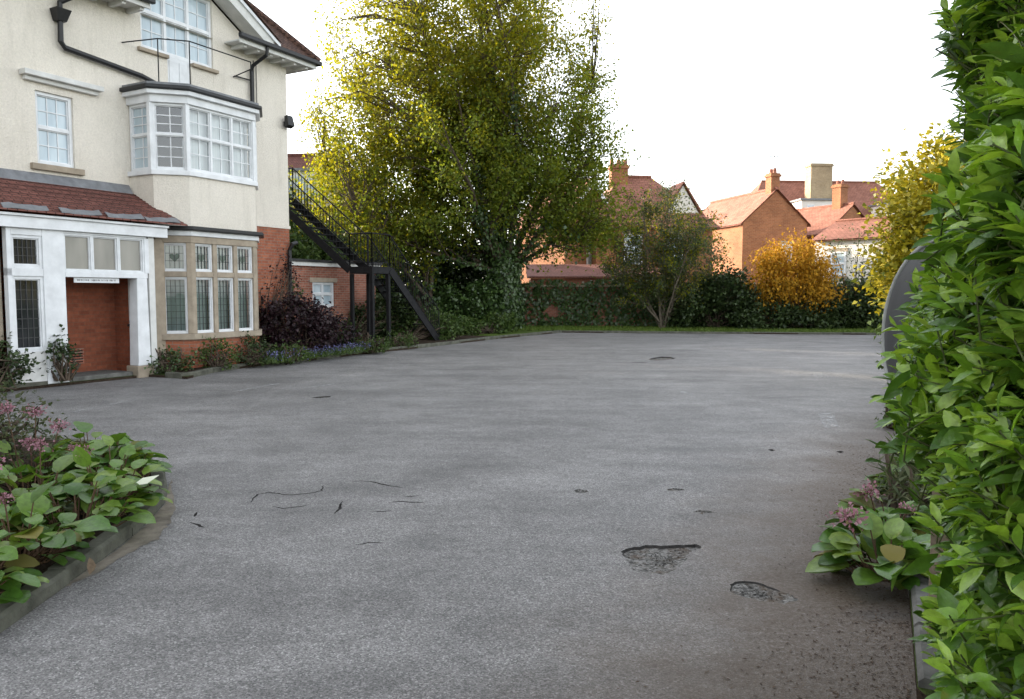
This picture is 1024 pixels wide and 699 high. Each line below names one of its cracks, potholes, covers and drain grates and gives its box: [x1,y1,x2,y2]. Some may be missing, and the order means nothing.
pothole [621,544,701,575]
crack [353,481,423,512]
pothole [730,581,798,604]
crack [251,486,343,514]
